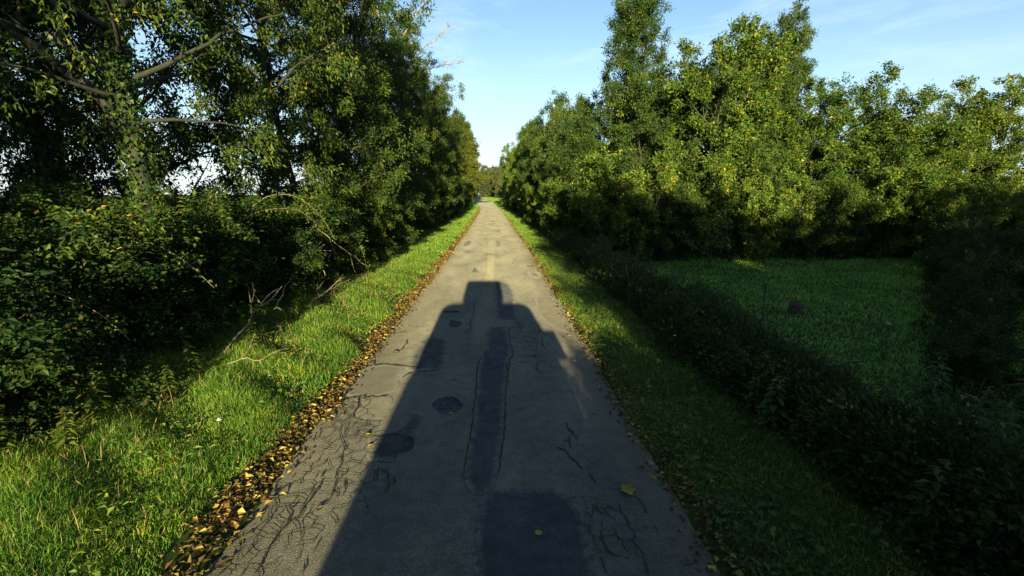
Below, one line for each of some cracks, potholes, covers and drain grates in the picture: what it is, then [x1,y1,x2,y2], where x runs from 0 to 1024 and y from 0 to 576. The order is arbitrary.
crack [210,332,441,576]
crack [557,422,658,573]
crack [484,318,558,374]
